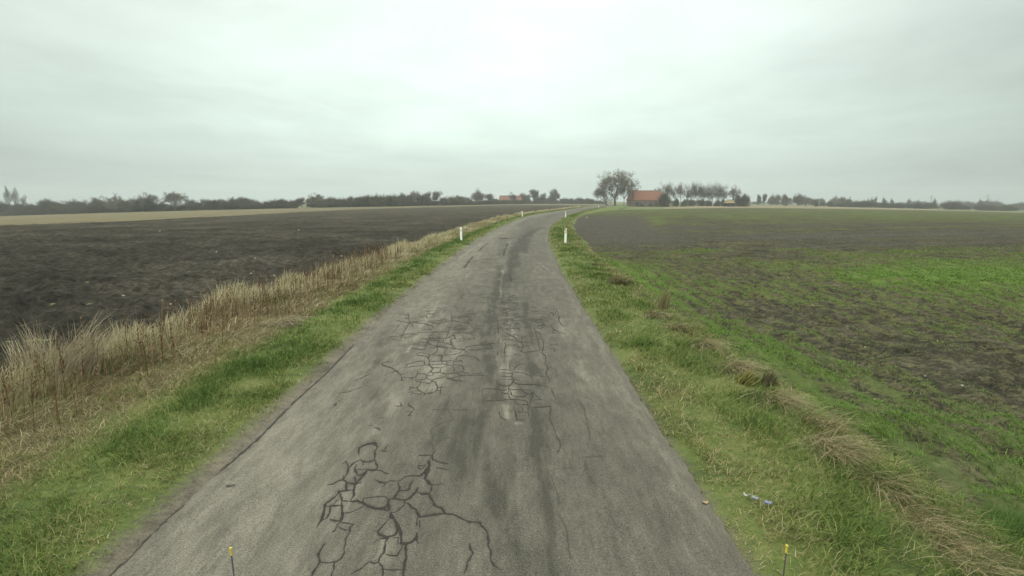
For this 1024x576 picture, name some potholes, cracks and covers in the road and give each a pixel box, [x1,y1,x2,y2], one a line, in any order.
crack [110,274,562,576]
